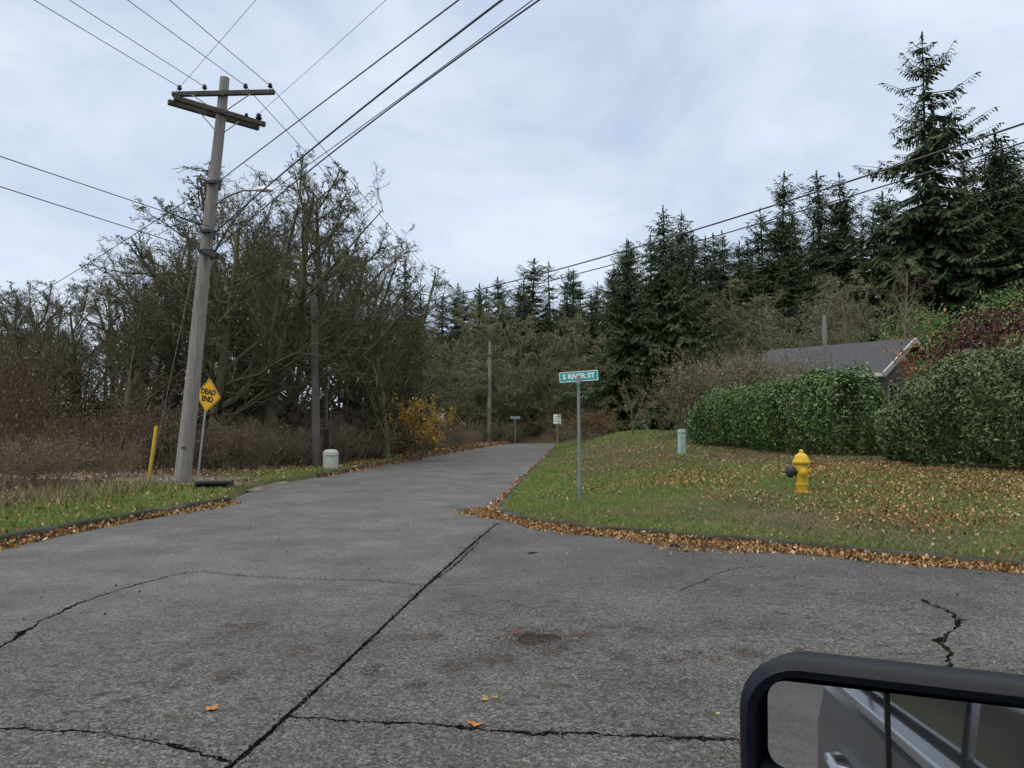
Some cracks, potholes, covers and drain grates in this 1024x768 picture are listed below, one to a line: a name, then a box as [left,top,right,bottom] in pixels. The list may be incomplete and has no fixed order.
crack [923,599,965,667]
crack [0,572,462,648]
crack [289,716,740,742]
crack [1,727,233,762]
pothole [516,633,562,646]
drain grate [194,480,234,489]
